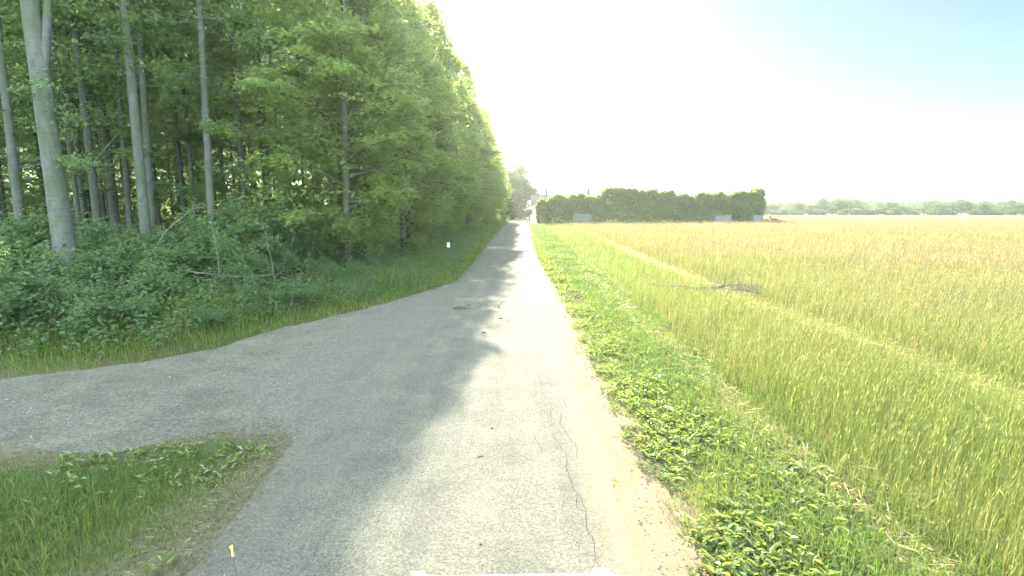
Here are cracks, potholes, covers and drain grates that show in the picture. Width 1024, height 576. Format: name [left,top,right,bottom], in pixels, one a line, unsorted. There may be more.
crack [534,375,597,562]
